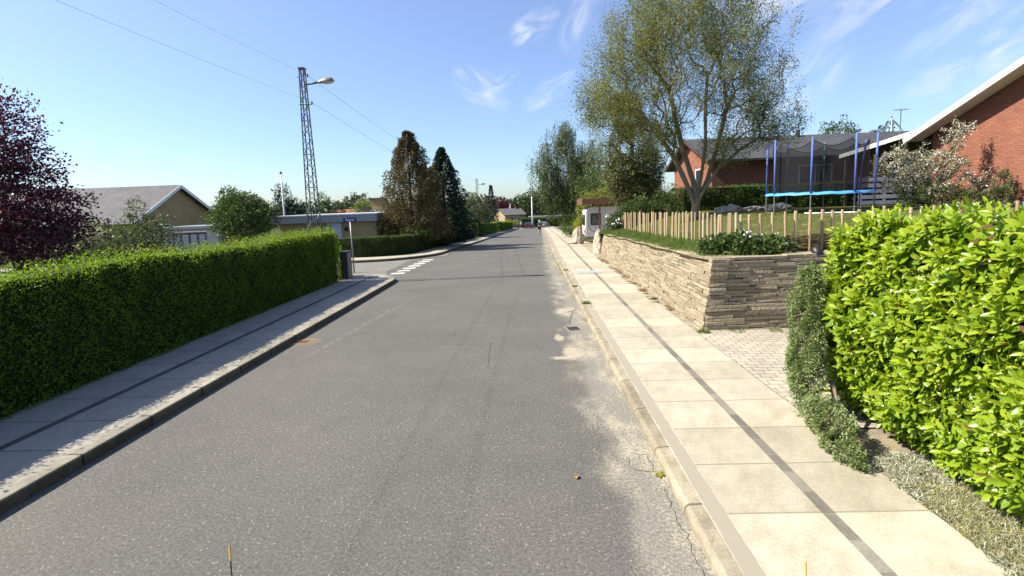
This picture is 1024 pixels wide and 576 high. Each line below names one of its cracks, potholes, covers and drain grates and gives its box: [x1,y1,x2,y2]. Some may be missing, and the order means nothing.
crack [664,489,705,576]
